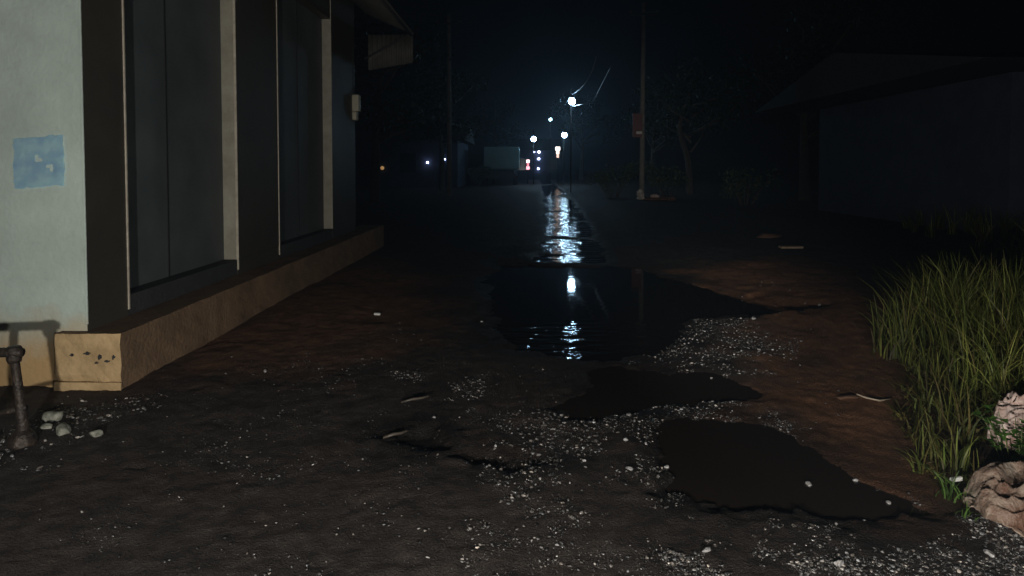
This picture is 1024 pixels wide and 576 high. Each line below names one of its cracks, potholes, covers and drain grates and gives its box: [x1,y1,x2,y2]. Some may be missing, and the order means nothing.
pothole [639,411,951,526]
pothole [478,263,821,364]
pothole [549,362,777,423]
